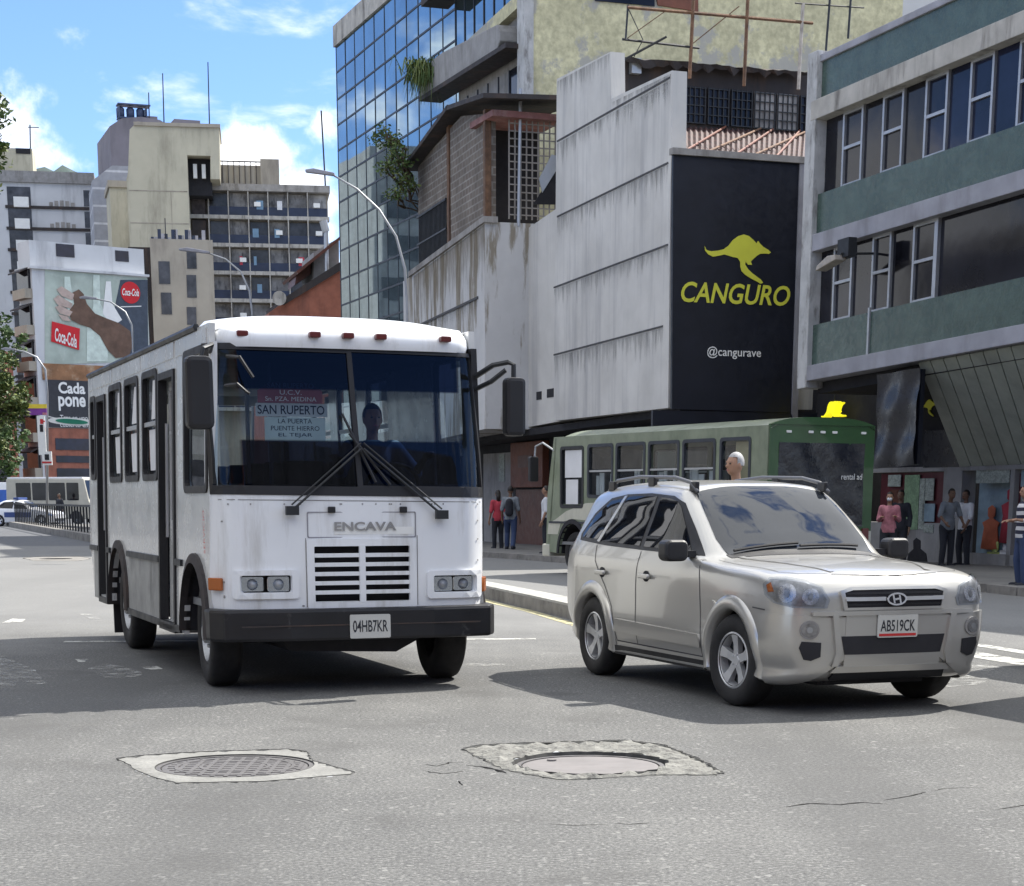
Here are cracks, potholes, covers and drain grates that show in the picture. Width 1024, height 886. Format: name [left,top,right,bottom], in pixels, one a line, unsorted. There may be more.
crack [424,762,506,786]
crack [788,787,969,807]
manhole cover [461,739,725,781]
manhole cover [116,749,355,784]
